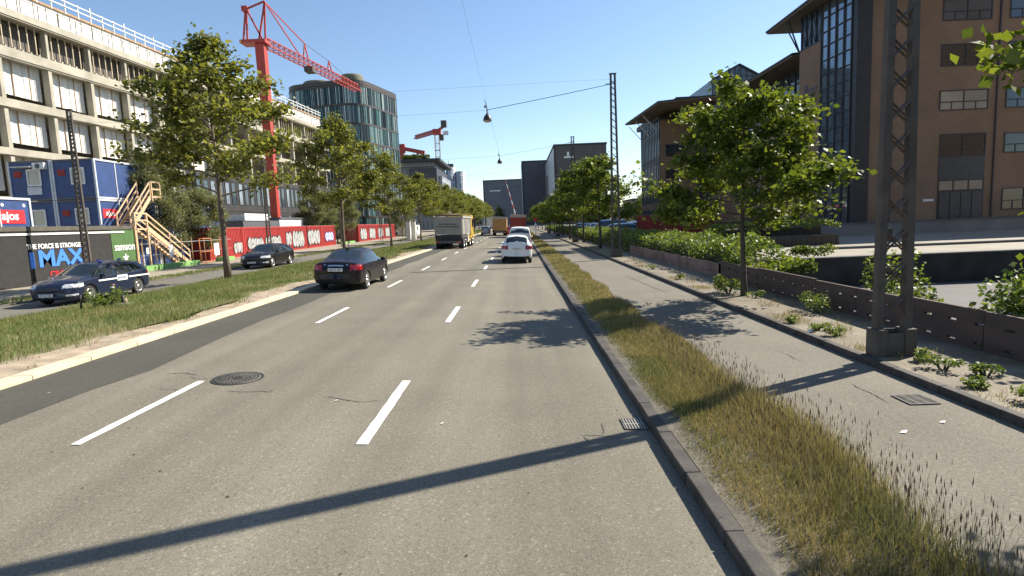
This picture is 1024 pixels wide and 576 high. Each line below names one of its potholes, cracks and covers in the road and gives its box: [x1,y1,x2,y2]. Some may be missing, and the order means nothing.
drain grate [891,394,941,405]
manhole cover [210,372,265,385]
drain grate [620,418,649,430]
